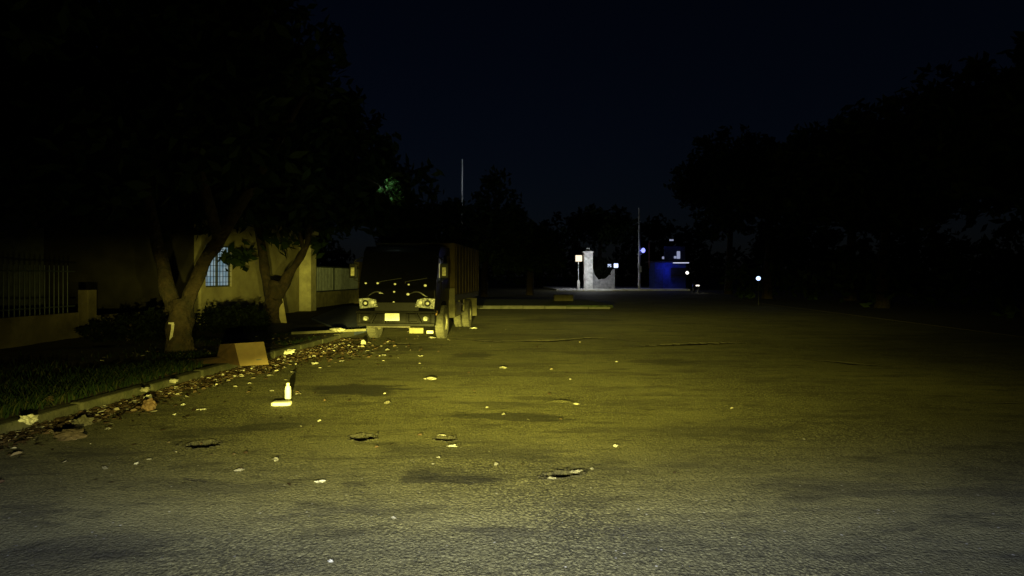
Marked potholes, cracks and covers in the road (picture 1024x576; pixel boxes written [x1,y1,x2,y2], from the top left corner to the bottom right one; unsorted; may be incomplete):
pothole [536,468,586,480]
crack [361,337,759,359]
pothole [176,439,223,450]
crack [803,359,887,367]
pothole [347,432,379,443]
